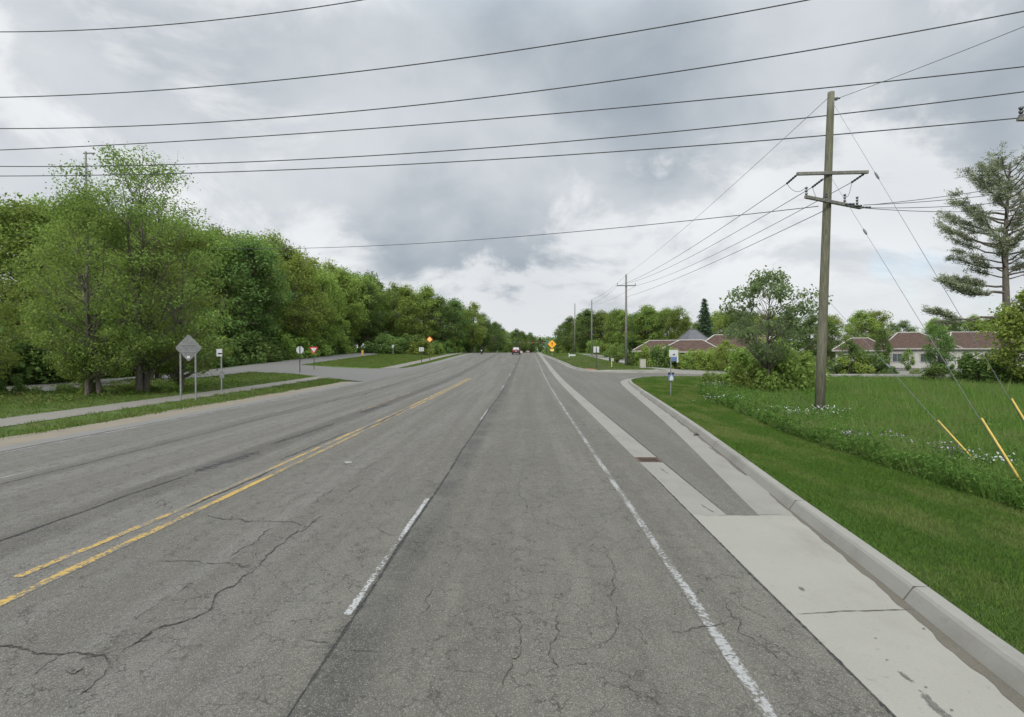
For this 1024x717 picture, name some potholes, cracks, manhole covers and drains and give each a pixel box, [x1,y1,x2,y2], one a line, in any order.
crack [545,543,647,677]
crack [0,423,372,695]
crack [500,593,522,690]
